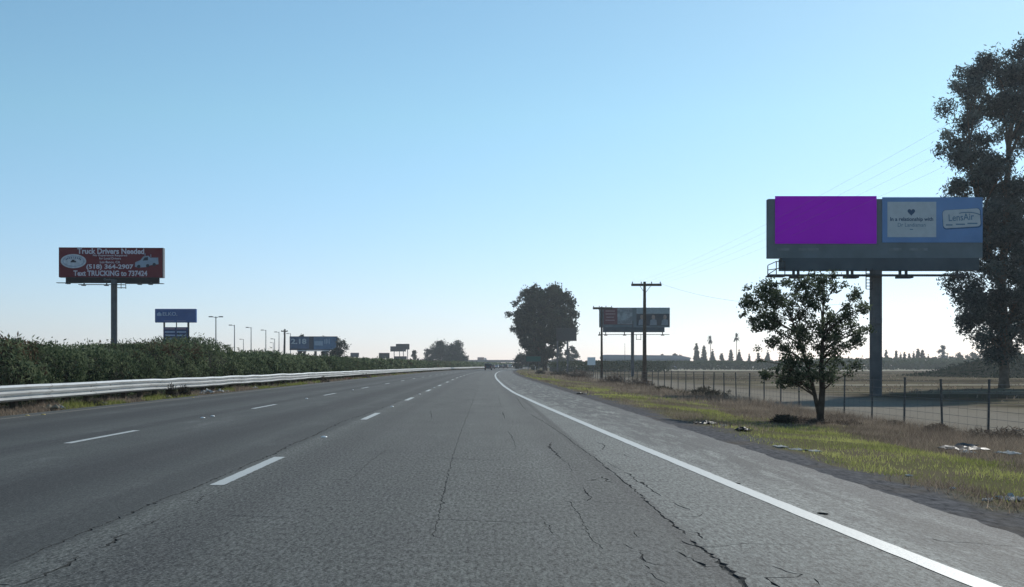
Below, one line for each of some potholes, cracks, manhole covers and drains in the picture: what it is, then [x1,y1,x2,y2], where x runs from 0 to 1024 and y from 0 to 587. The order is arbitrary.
crack [516,397,820,587]
